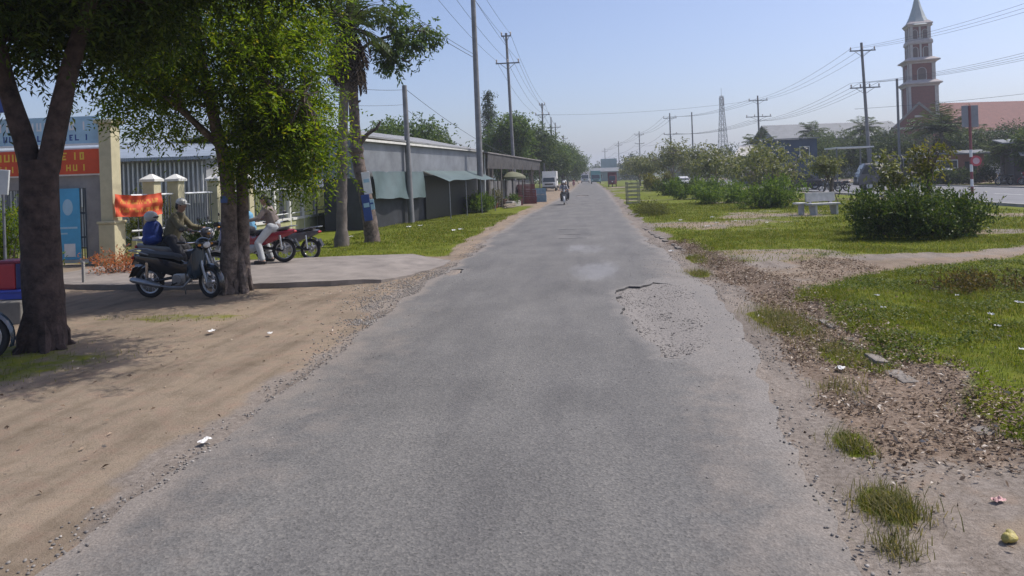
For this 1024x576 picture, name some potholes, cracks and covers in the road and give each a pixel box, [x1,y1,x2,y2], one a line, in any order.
pothole [615,282,711,358]
